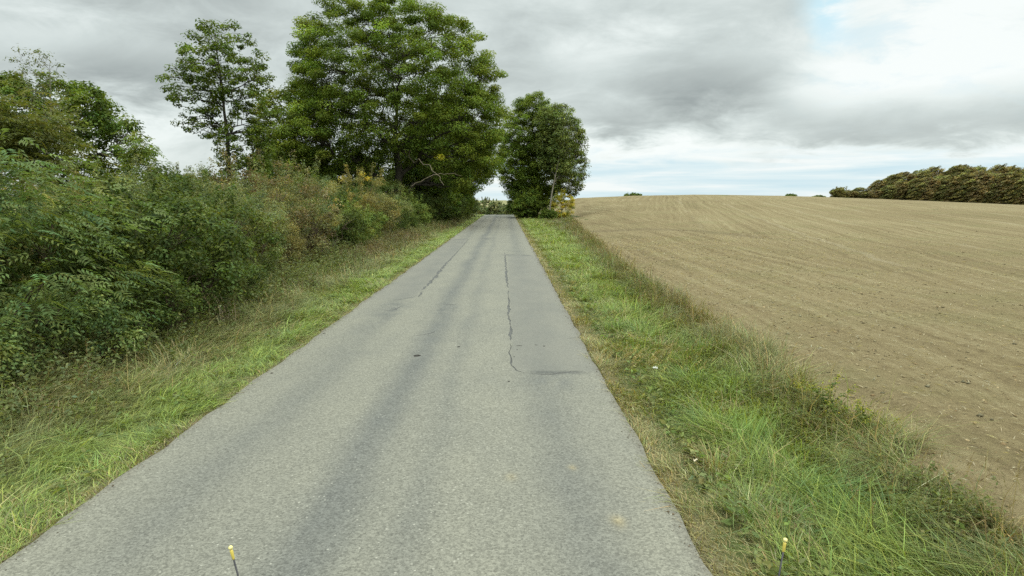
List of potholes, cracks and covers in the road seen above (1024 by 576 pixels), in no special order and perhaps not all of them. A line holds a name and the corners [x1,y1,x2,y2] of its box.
crack [387,239,468,311]
